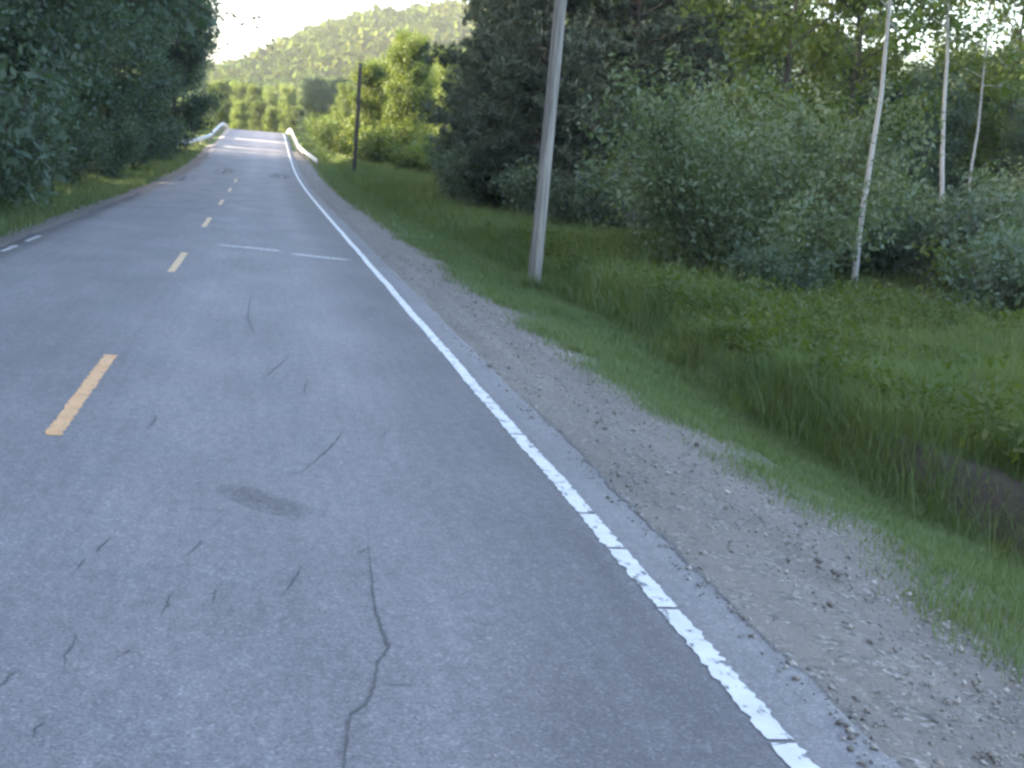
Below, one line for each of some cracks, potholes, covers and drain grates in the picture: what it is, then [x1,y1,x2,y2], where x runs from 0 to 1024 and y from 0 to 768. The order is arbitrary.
crack [338,540,410,768]
crack [285,431,343,478]
